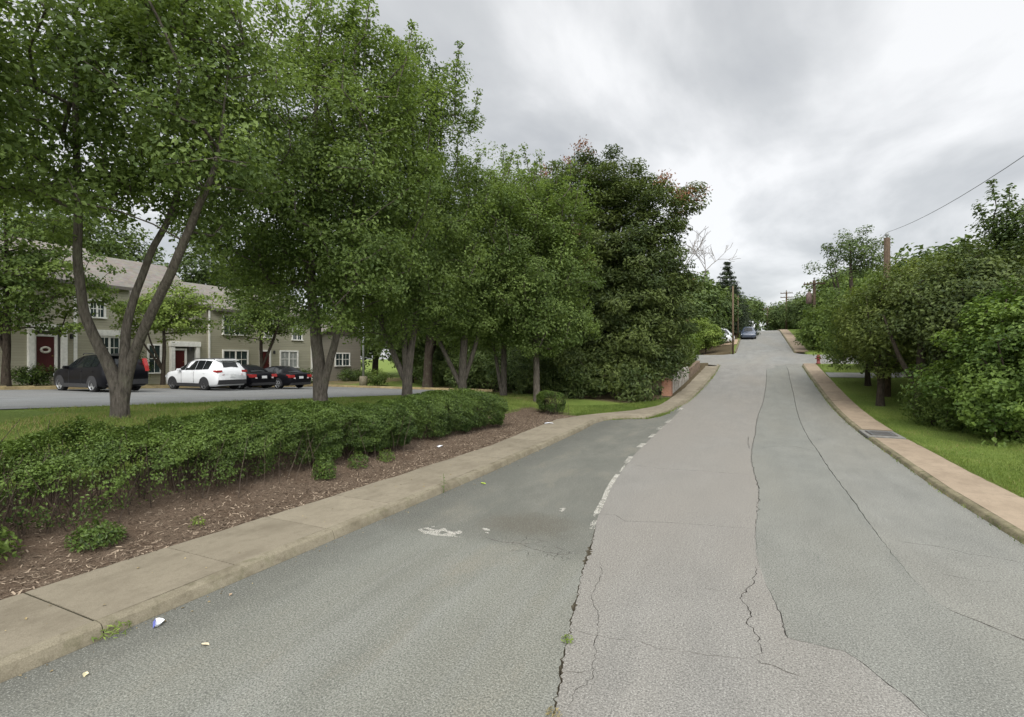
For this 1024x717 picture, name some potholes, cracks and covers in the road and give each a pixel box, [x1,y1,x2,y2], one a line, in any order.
crack [485,534,578,561]
crack [565,559,803,708]
drain grate [859,430,906,439]
